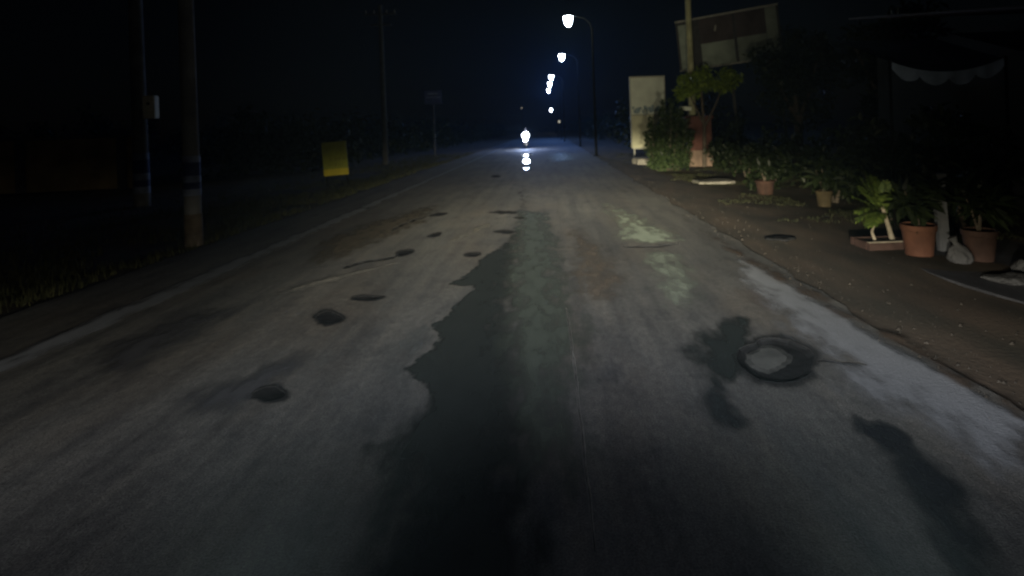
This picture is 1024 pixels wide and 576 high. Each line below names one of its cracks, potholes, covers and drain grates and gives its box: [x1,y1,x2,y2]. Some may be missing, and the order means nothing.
crack [342,255,397,269]
pothole [248,384,289,403]
pothole [312,309,346,326]
pothole [735,334,821,387]
